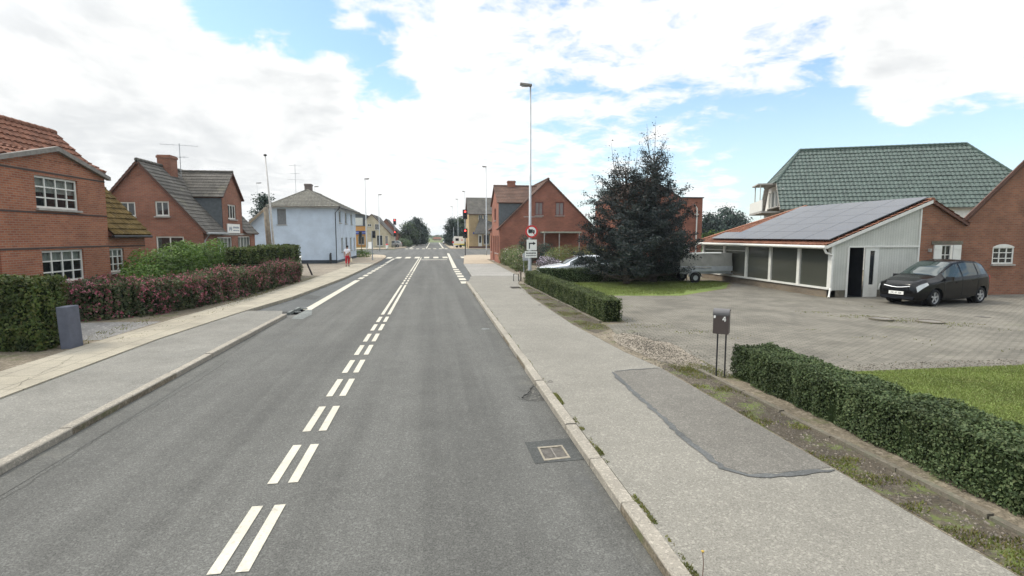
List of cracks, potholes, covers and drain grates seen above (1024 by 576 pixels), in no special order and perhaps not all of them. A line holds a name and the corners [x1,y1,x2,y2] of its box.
drain grate [537,445,571,461]
pothole [521,386,544,401]
